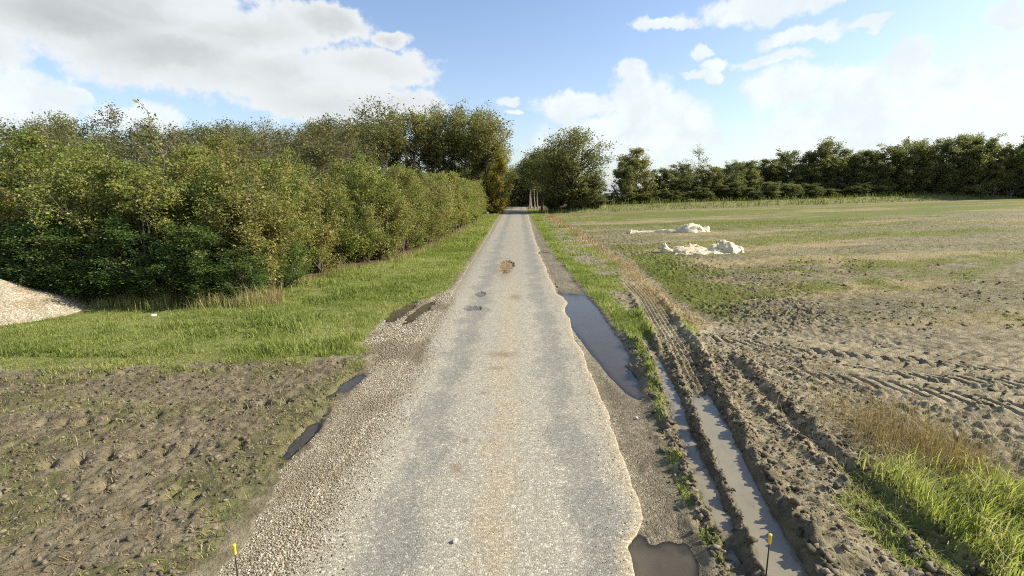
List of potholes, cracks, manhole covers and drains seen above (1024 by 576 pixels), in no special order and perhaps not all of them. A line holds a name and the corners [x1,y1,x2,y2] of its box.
pothole [497,258,515,274]
